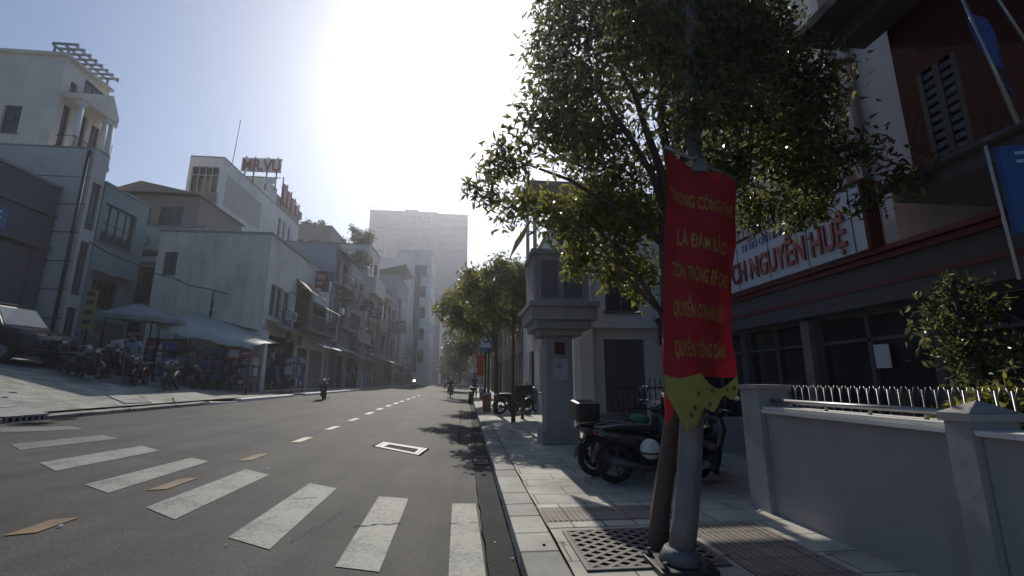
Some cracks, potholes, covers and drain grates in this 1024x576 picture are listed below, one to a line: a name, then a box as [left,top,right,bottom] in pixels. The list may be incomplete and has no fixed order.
manhole cover [373,442,429,456]
drain grate [0,406,50,424]
drain grate [472,456,490,465]
